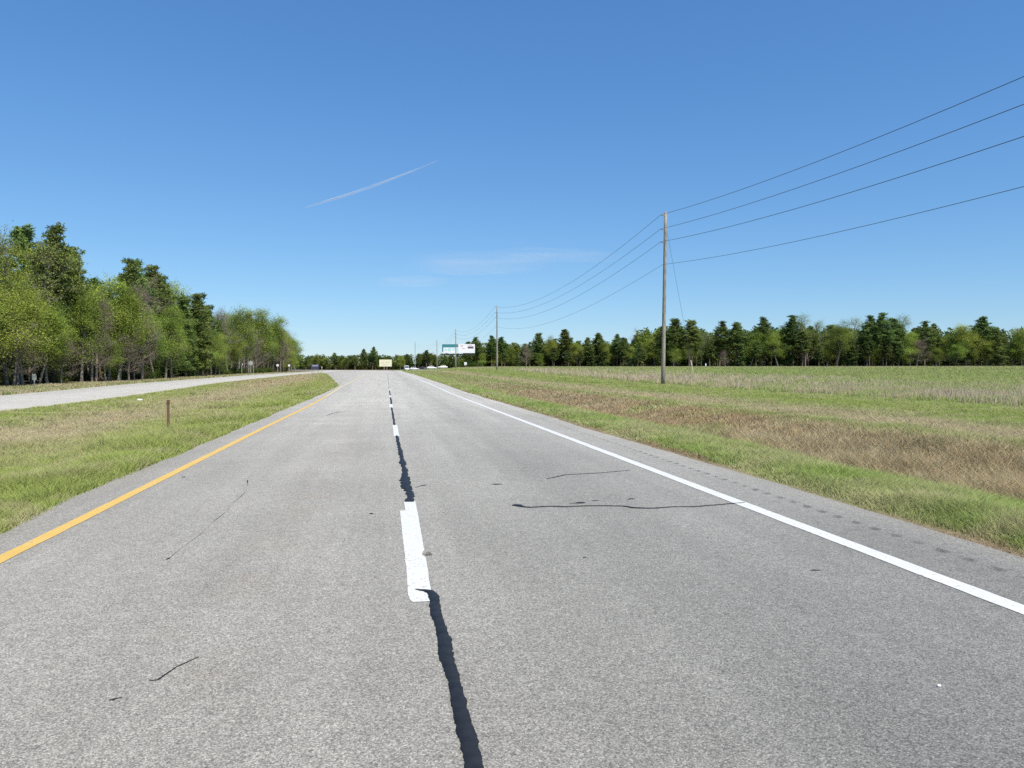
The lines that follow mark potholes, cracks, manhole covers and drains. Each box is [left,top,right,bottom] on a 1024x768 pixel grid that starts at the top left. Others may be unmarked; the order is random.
crack [166,480,248,560]
crack [149,656,199,681]
crack [546,470,630,479]
